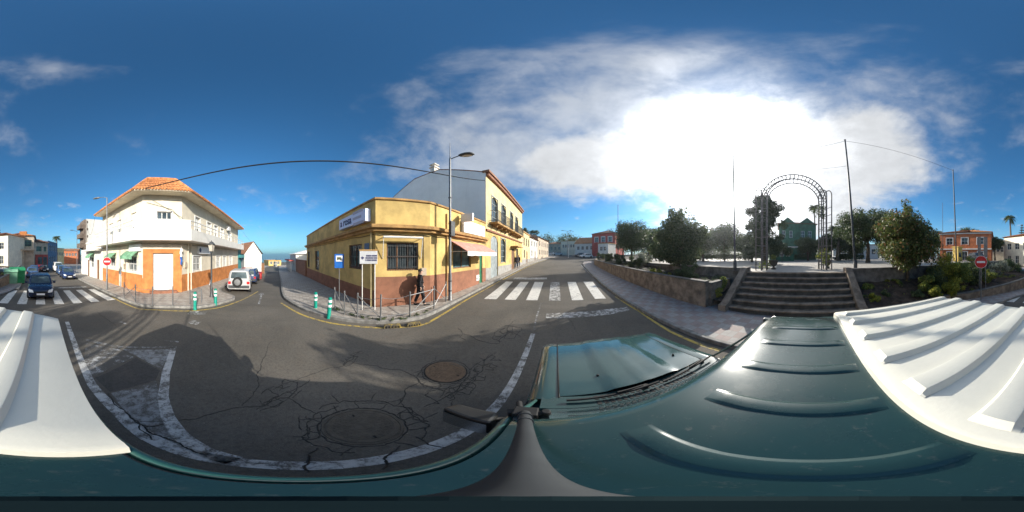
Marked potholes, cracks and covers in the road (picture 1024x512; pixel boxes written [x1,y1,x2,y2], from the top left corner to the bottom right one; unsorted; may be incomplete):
crack [108,321,522,473]
manhole cover [424,361,467,383]
manhole cover [321,409,404,445]
